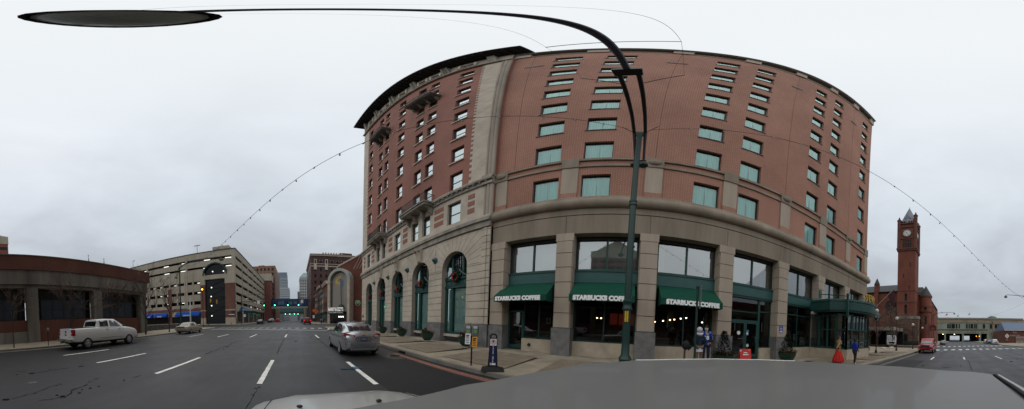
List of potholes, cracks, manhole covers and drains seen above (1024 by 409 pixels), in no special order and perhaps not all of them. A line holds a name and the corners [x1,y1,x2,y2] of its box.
crack [12,364,100,400]
